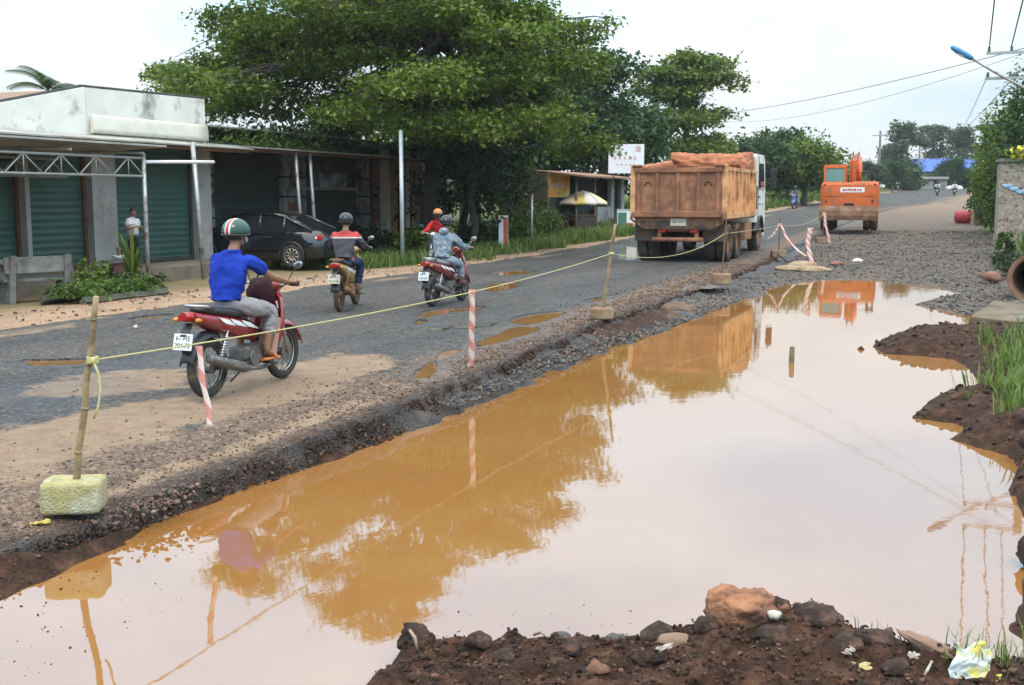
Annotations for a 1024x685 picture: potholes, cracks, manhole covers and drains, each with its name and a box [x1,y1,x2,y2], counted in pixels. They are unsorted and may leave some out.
pothole [401,305,500,319]
pothole [459,325,555,349]
pothole [469,281,534,294]
pothole [476,269,550,277]
pothole [492,310,580,326]
pothole [3,357,106,369]
